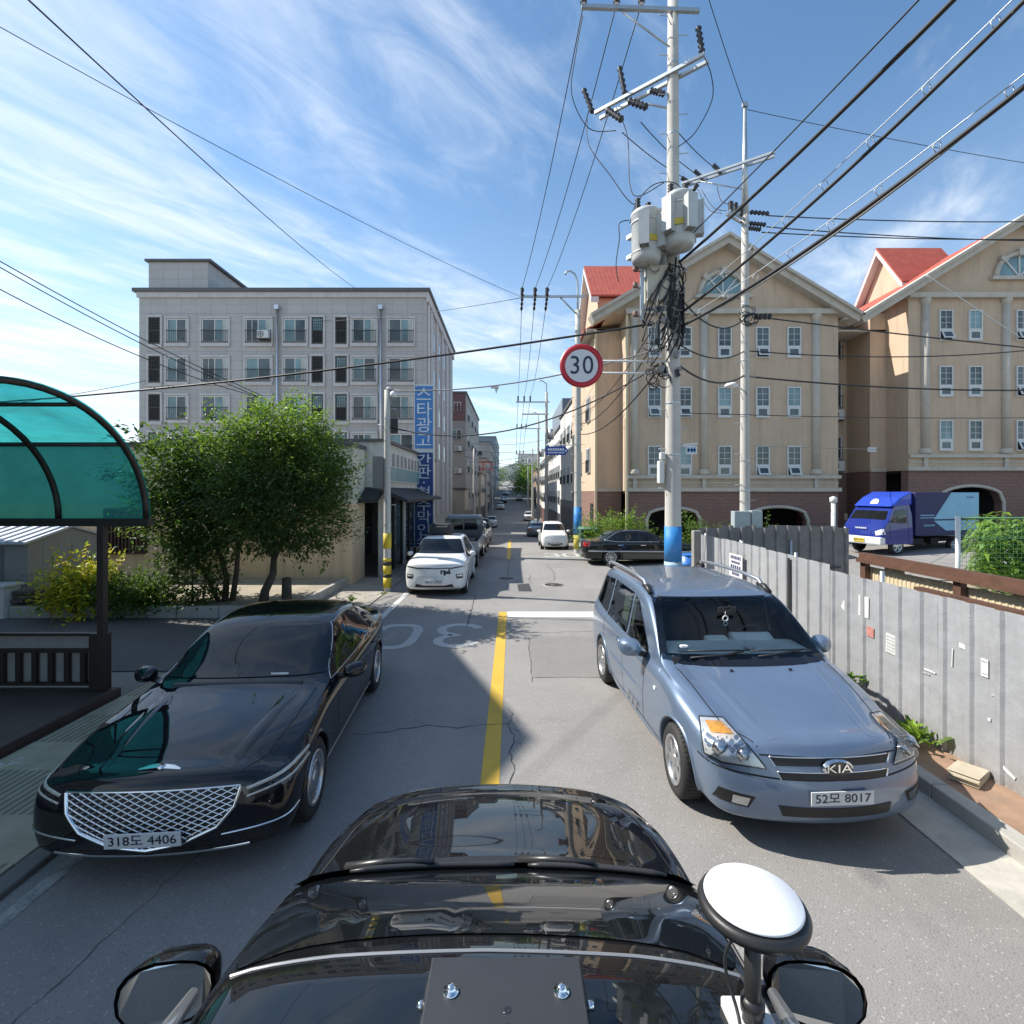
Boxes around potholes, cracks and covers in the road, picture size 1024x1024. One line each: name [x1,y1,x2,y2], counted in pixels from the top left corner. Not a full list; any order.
crack [349,708,521,784]
